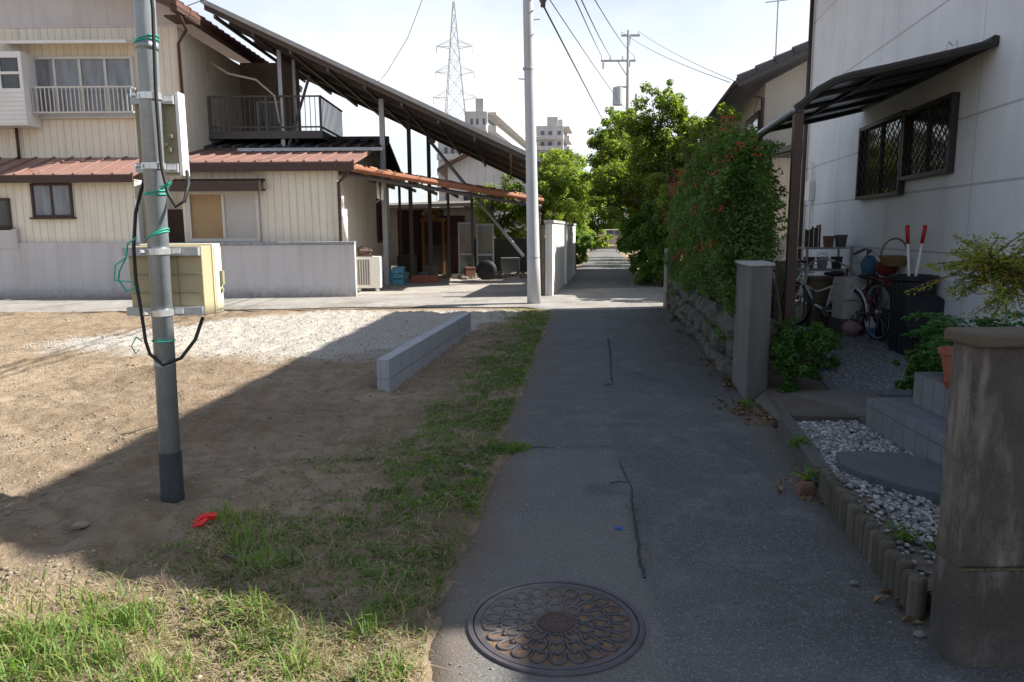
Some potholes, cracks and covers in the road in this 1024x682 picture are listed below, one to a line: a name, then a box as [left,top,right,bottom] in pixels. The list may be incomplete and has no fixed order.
crack [604,338,614,385]
manhole cover [467,580,646,677]
crack [610,462,646,578]
